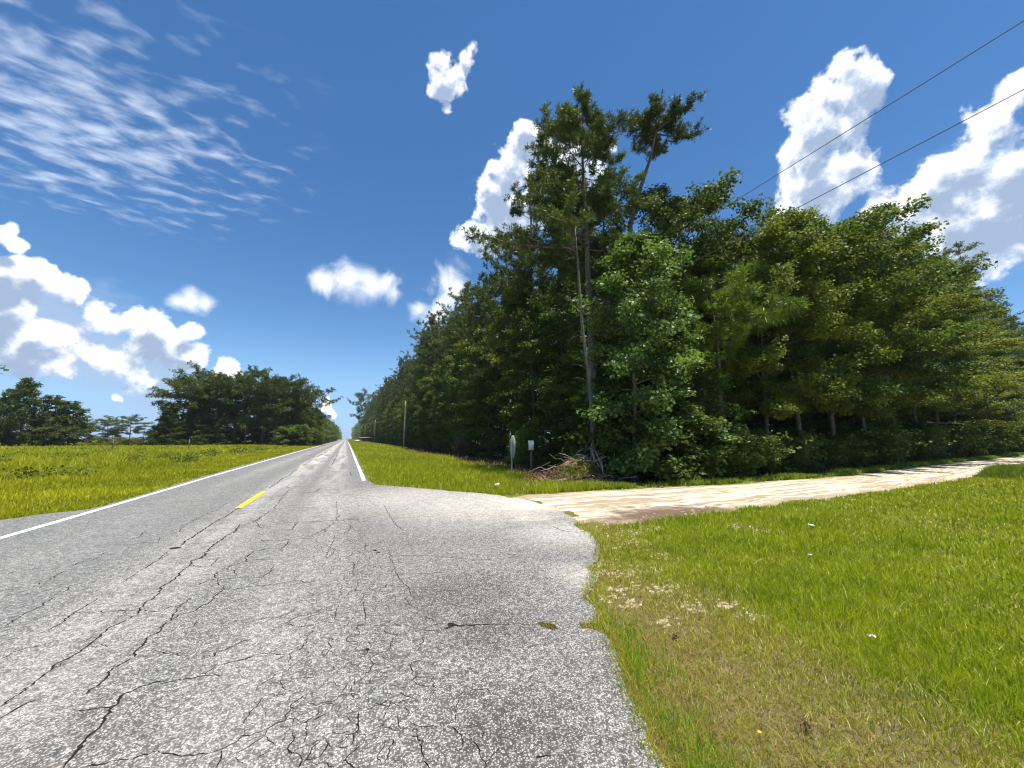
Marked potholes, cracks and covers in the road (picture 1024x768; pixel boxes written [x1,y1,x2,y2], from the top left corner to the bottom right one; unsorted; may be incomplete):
crack [418,623,531,631]
crack [1,451,499,768]
